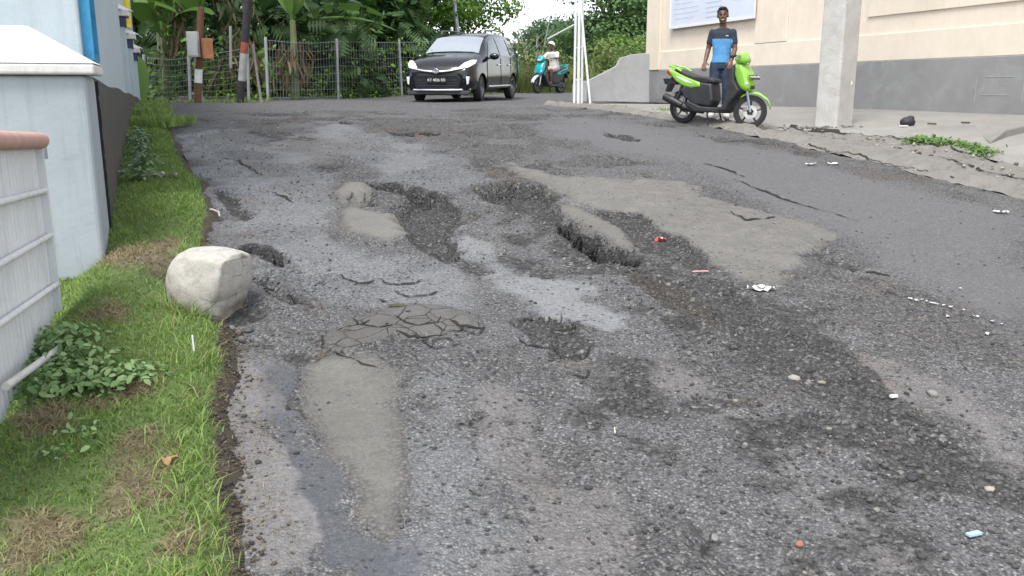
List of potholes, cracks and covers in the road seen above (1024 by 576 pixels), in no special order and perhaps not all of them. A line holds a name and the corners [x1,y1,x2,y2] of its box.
pothole [603,134,640,142]
pothole [381,186,435,211]
pothole [395,195,466,264]
pothole [517,316,590,361]
pothole [478,183,555,215]
crack [320,274,486,369]
crack [705,163,857,221]
pothole [557,226,640,268]
